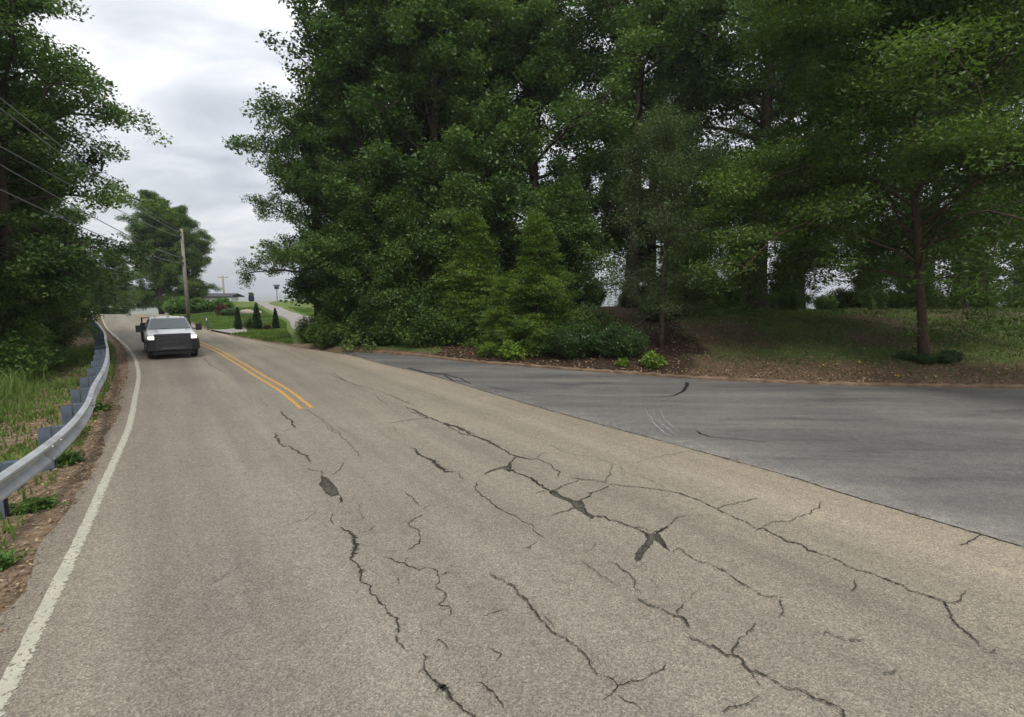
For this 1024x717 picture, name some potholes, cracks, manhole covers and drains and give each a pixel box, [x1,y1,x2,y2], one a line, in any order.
pothole [319,475,339,497]
pothole [634,533,669,562]
crack [248,493,504,717]
crack [582,545,846,717]
crack [319,372,1022,653]
crack [485,572,666,709]
crack [261,400,344,475]
